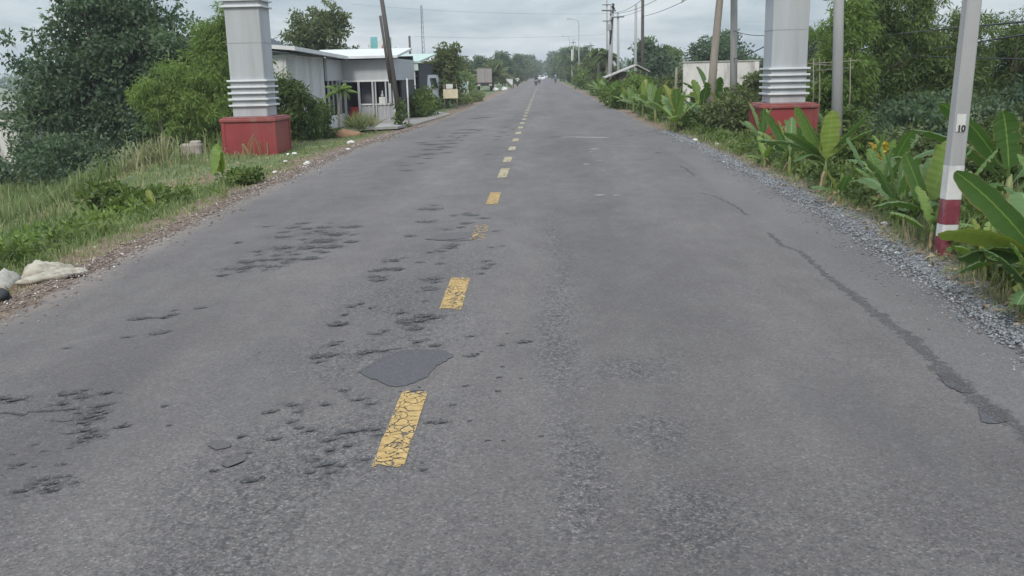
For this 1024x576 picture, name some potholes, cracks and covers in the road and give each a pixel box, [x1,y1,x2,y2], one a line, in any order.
pothole [428,231,479,241]
crack [680,166,747,215]
